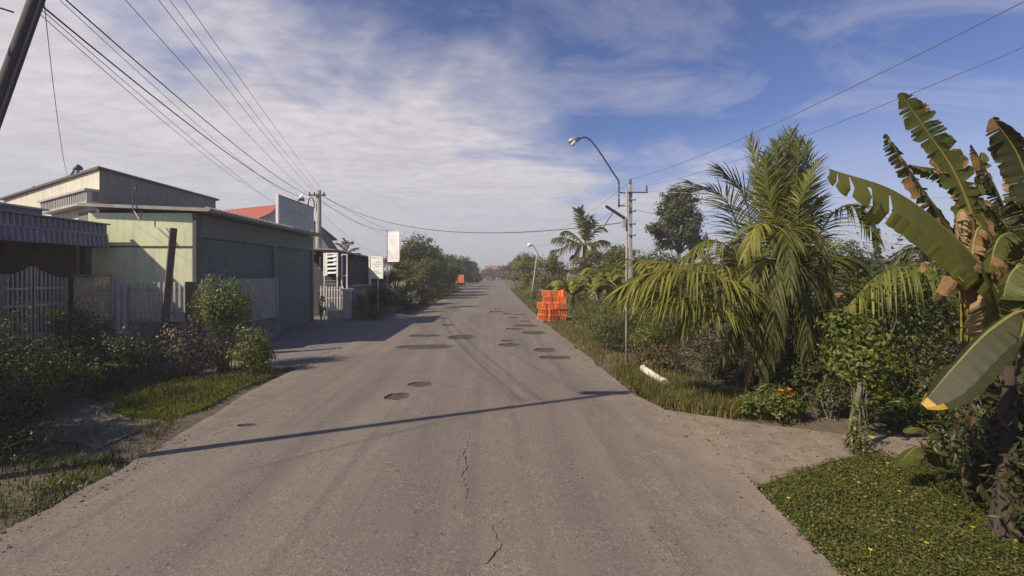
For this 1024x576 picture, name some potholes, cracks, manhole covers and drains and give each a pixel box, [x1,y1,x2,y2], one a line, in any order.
crack [460,437,471,499]
crack [473,518,506,567]
pothole [384,392,410,400]
